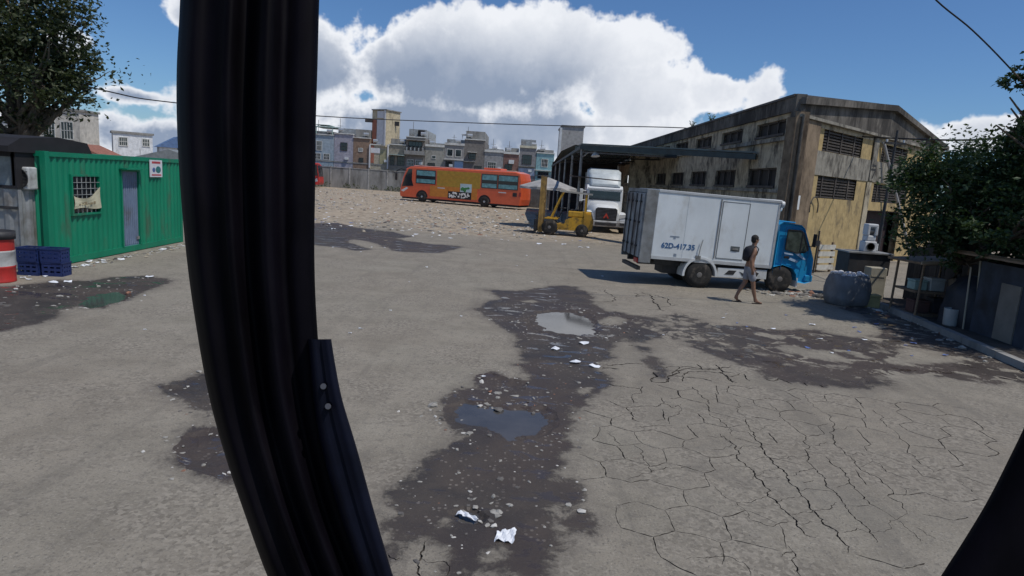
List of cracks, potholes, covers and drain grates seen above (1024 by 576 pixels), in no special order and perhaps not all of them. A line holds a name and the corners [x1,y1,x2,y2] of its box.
crack [580,345,1018,575]
crack [388,542,450,576]
pothole [523,308,604,338]
pothole [443,399,562,442]
crack [635,293,674,311]
